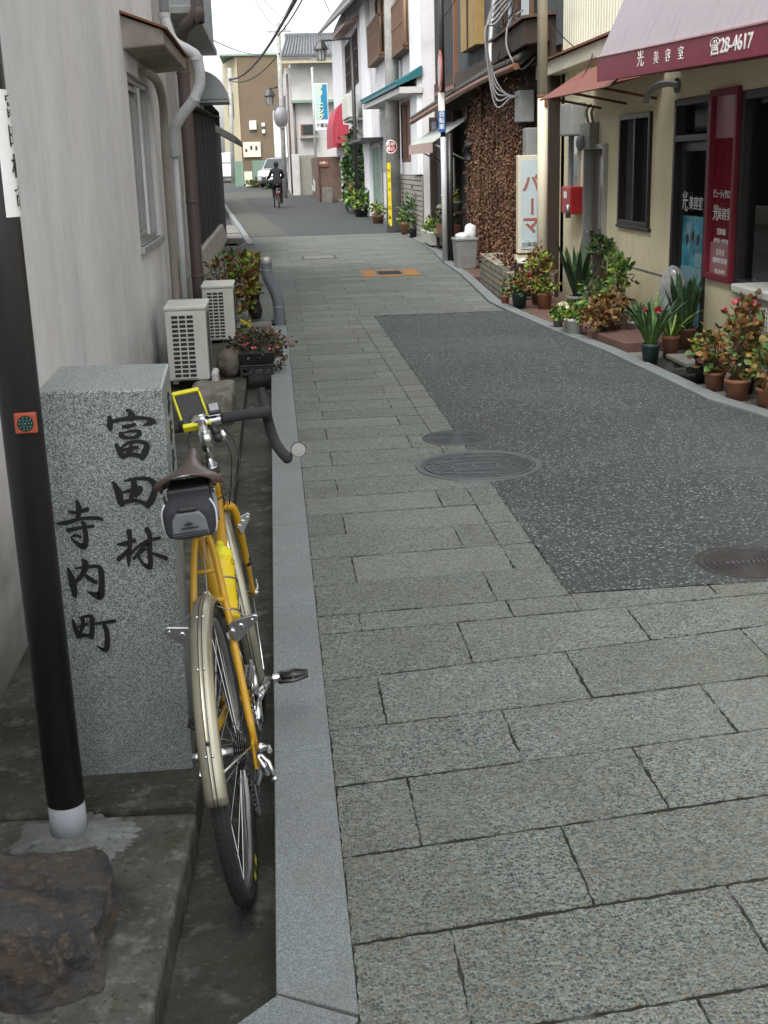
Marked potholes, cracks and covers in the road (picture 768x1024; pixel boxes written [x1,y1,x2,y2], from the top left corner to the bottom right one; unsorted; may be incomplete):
manhole cover [416,450,543,482]
manhole cover [422,430,493,446]
manhole cover [695,546,768,580]
